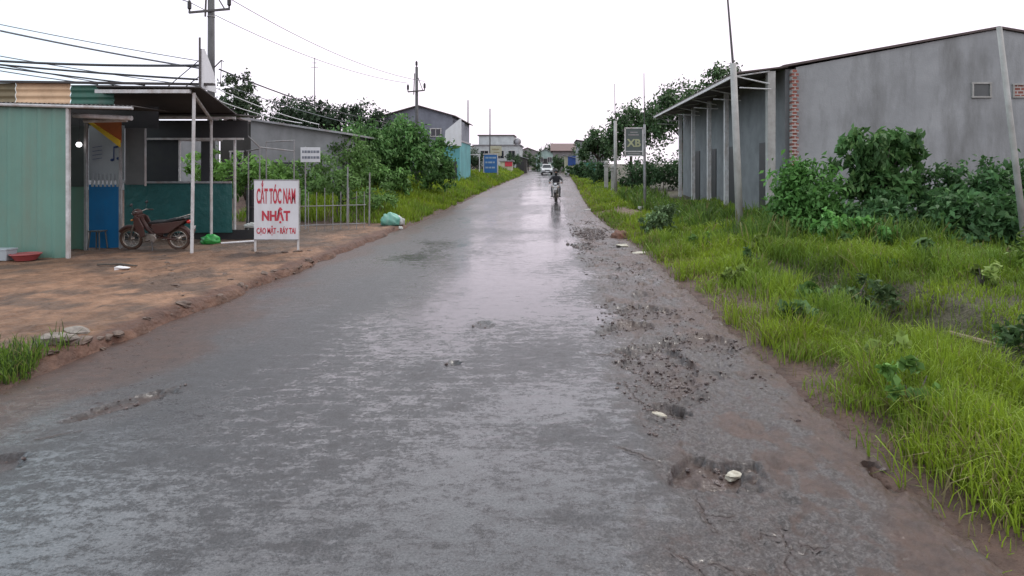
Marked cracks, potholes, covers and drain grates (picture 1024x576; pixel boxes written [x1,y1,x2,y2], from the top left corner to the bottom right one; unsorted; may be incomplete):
pothole [858,460,898,493]
crack [665,492,845,576]
pothole [0,450,35,474]
pothole [603,320,662,333]
pothole [650,332,750,357]
pothole [661,452,778,498]
pothole [54,384,193,424]
pothole [574,228,608,241]
pothole [470,319,497,329]
pothole [646,402,696,422]
pothole [612,303,678,321]
